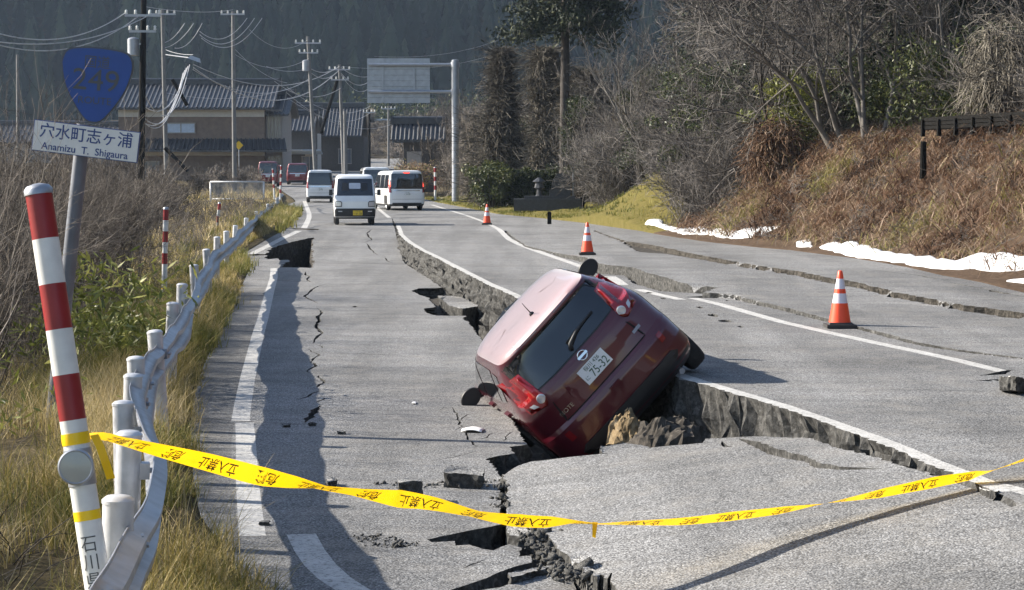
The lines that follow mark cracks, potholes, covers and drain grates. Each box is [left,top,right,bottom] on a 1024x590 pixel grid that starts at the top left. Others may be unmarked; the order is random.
crack [296,272,326,422]
crack [366,219,1024,590]
